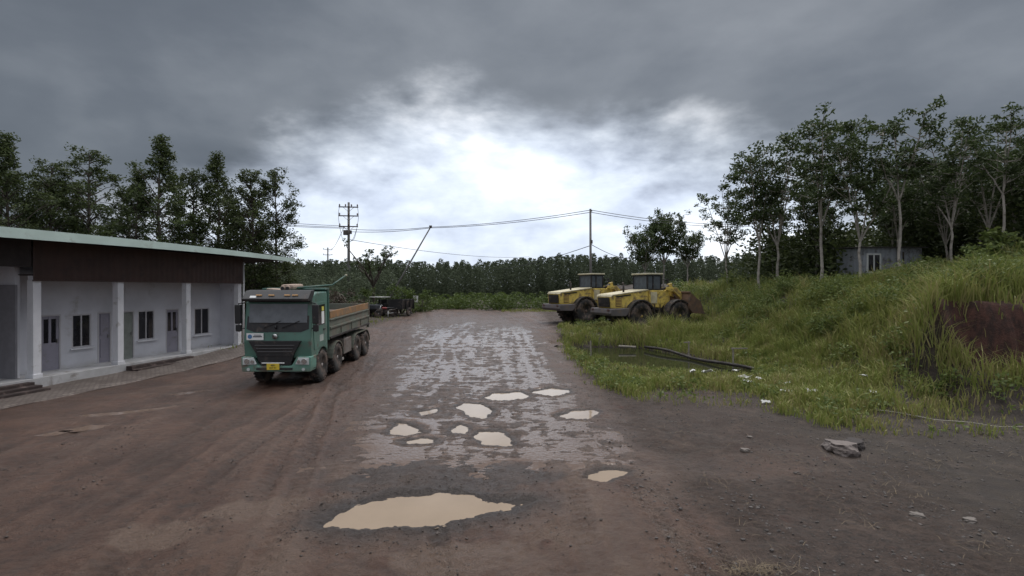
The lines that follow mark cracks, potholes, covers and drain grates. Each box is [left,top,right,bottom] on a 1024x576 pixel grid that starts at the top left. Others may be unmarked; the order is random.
pothole [575,464,638,483]
pothole [381,419,429,437]
pothole [396,435,443,446]
pothole [451,401,499,419]
pothole [310,485,541,534]
pothole [443,421,475,435]
pothole [553,407,605,421]
pothole [467,428,520,448]
pothole [524,386,575,397]
pothole [409,408,443,416]
pothole [480,390,536,401]
